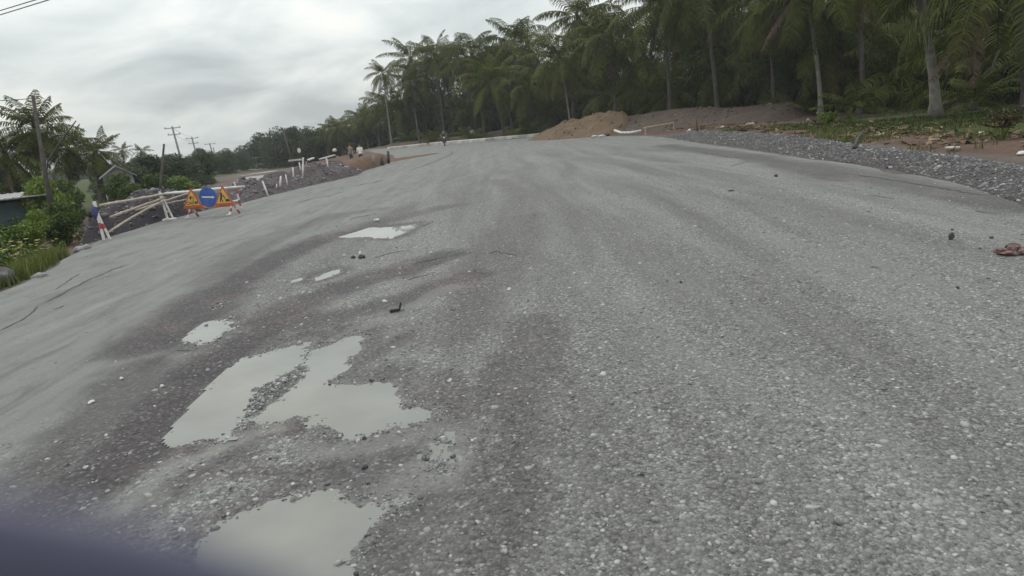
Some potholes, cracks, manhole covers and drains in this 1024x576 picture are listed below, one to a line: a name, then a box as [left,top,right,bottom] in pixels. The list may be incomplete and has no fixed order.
pothole [339,223,420,239]
pothole [162,330,453,448]
pothole [181,317,239,348]
crack [1,264,129,330]
pothole [198,482,421,576]
